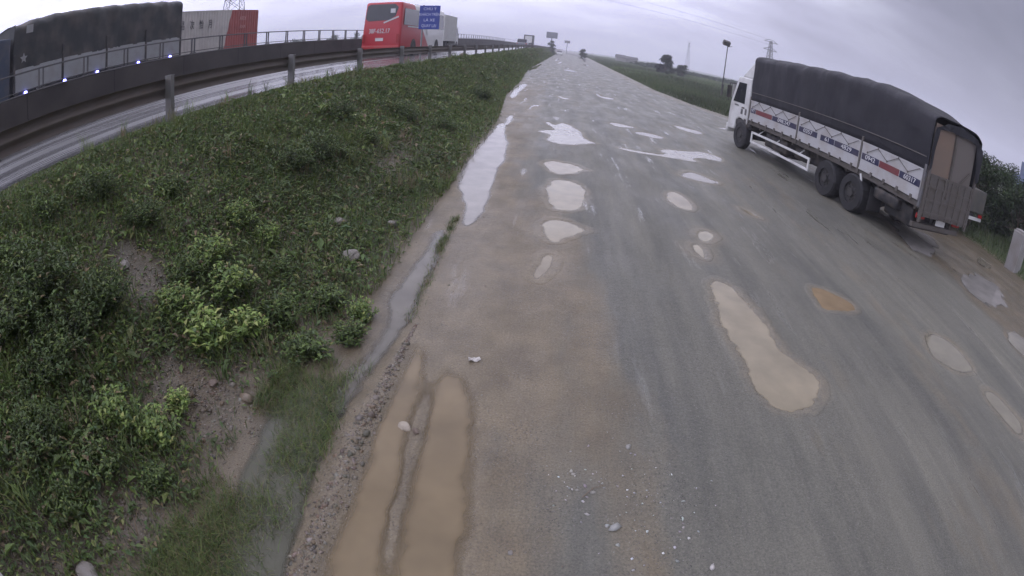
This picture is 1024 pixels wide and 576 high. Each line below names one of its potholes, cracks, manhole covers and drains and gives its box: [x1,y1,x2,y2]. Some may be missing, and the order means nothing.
pothole [537,159,594,176]
pothole [700,275,831,418]
pothole [919,329,980,377]
pothole [532,216,594,245]
pothole [690,228,723,245]
pothole [521,250,565,285]
pothole [675,170,724,186]
pothole [539,178,593,214]
pothole [534,121,600,146]
pothole [978,384,1024,441]
pothole [615,146,727,163]
pothole [660,190,699,213]
